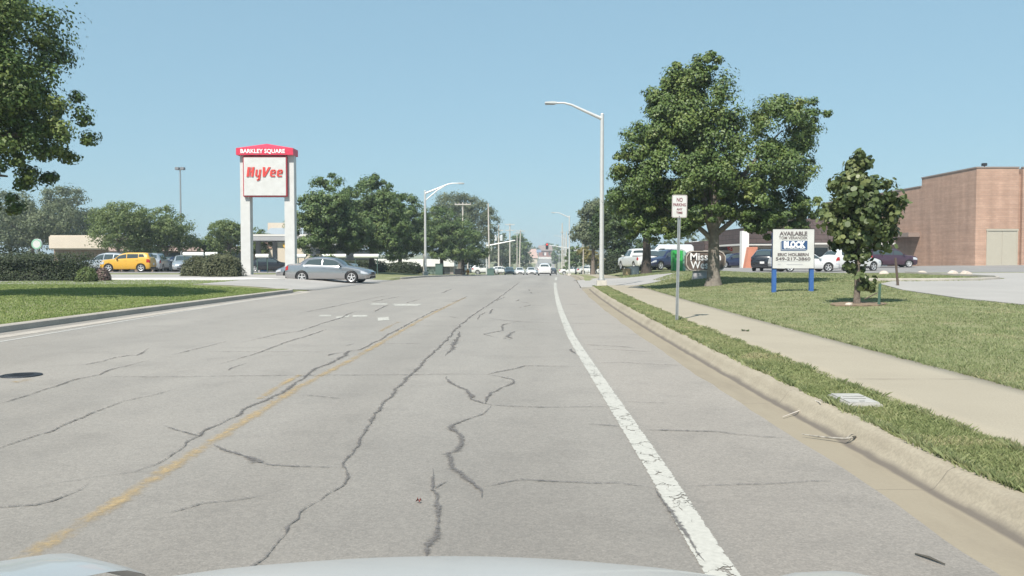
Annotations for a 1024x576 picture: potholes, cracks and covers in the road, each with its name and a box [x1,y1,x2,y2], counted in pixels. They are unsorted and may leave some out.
crack [2,297,820,560]
